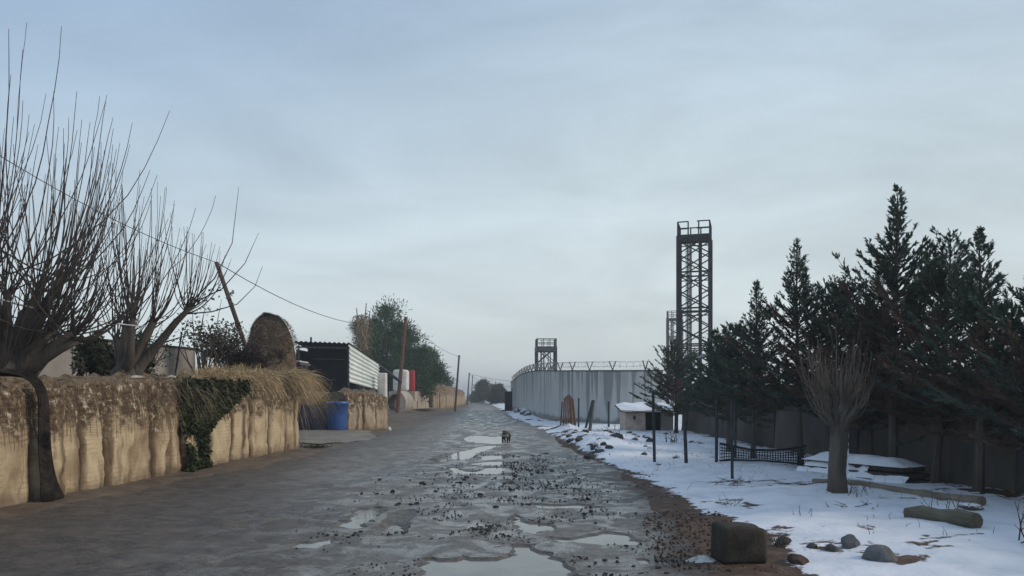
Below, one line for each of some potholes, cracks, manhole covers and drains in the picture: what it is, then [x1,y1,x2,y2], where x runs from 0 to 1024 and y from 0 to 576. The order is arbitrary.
pothole [450,445,497,459]
pothole [289,536,336,548]
pothole [509,513,557,534]
pothole [413,543,581,576]
pothole [376,509,418,531]
pothole [462,435,504,444]
pothole [336,506,388,530]
pothole [544,531,644,545]
